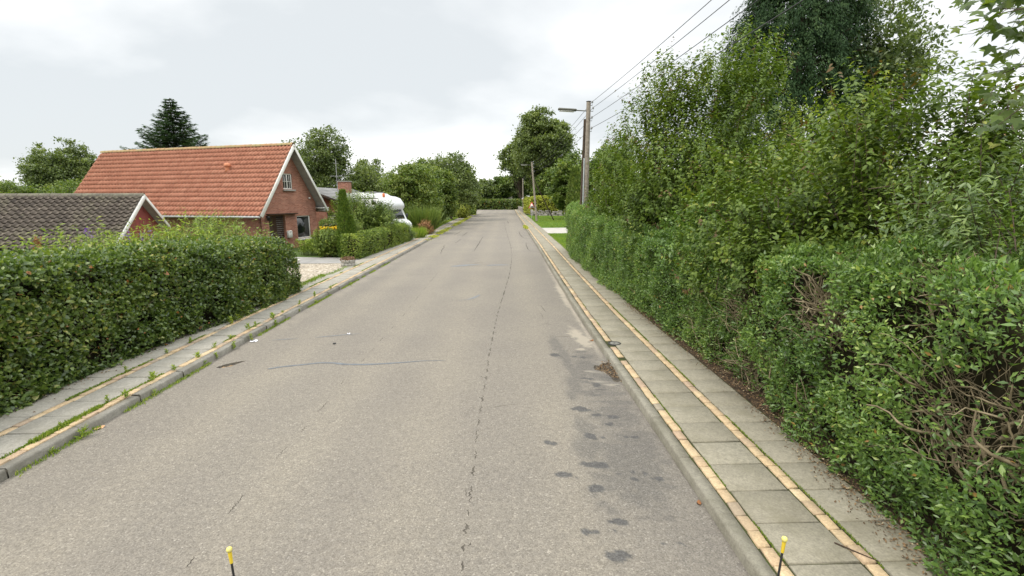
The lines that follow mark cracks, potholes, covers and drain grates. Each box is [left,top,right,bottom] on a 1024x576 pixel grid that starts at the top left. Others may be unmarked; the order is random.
crack [460,222,530,572]
